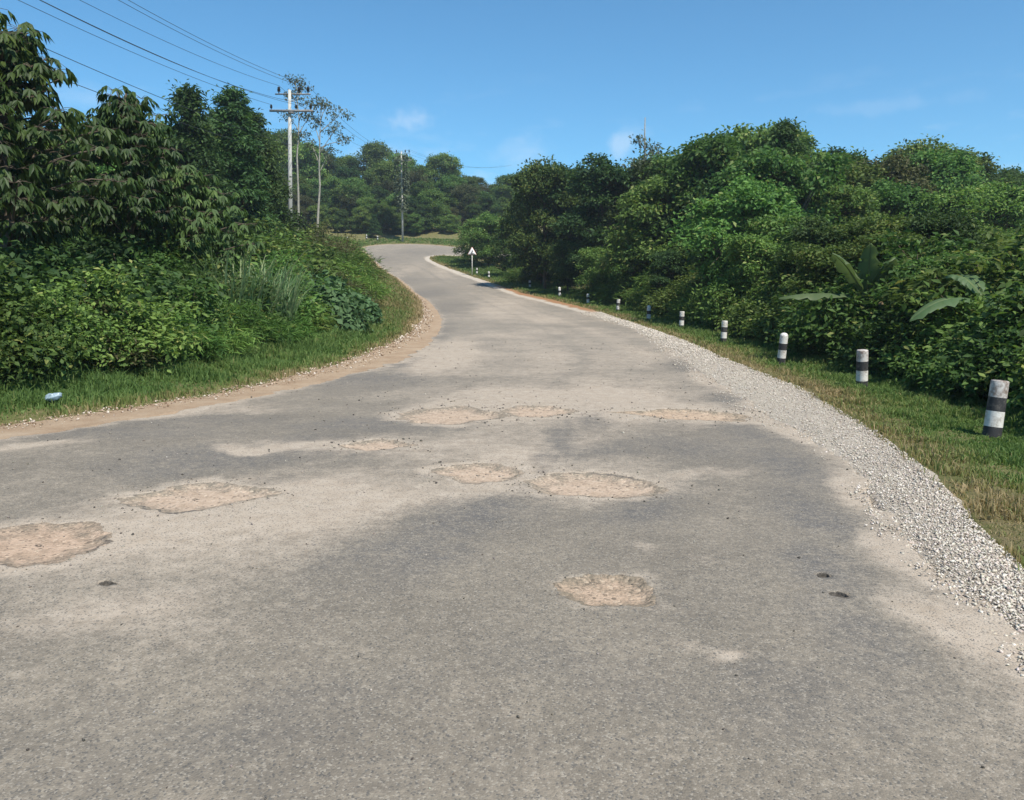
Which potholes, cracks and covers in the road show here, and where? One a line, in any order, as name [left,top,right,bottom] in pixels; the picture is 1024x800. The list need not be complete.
pothole [0,521,114,568]
pothole [553,574,656,607]
pothole [500,405,578,418]
pothole [116,482,283,514]
pothole [430,463,526,485]
pothole [612,409,752,422]
pothole [395,406,510,425]
pothole [523,472,670,499]
pothole [339,439,418,451]
